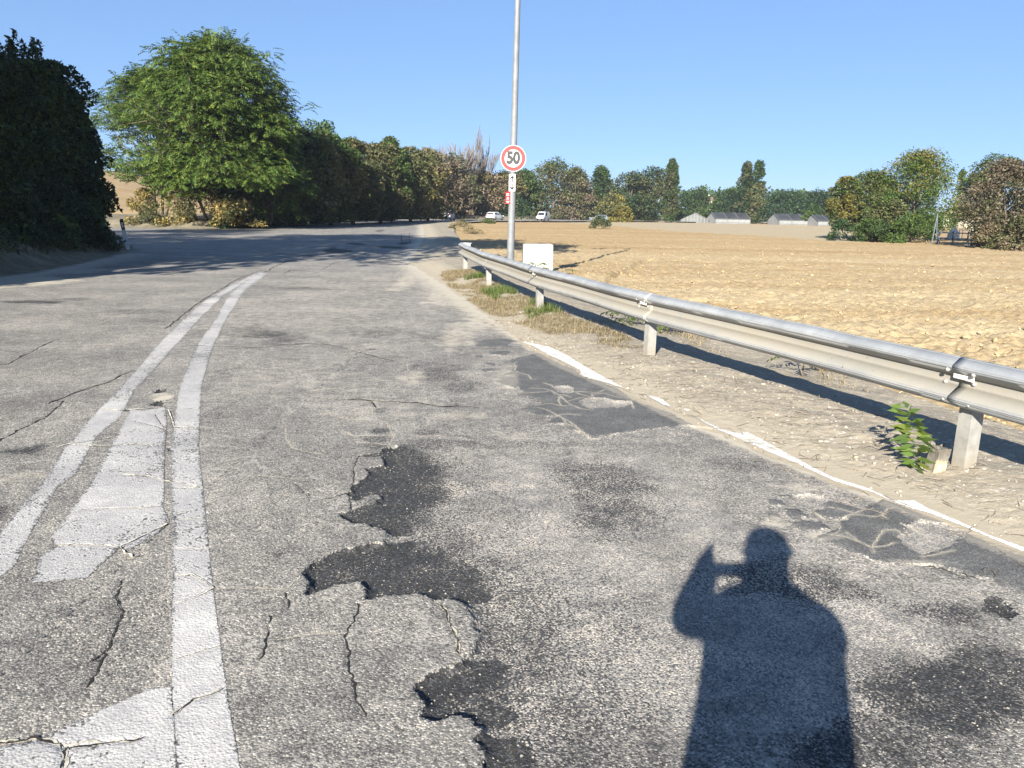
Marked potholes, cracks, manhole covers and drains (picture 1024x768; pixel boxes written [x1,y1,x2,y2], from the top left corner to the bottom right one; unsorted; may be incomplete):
pothole [301,539,513,604]
pothole [413,657,532,730]
crack [432,599,461,655]
crack [0,370,196,447]
crack [259,399,480,509]
crack [85,579,125,689]
crack [0,736,143,768]
pothole [339,446,469,536]
